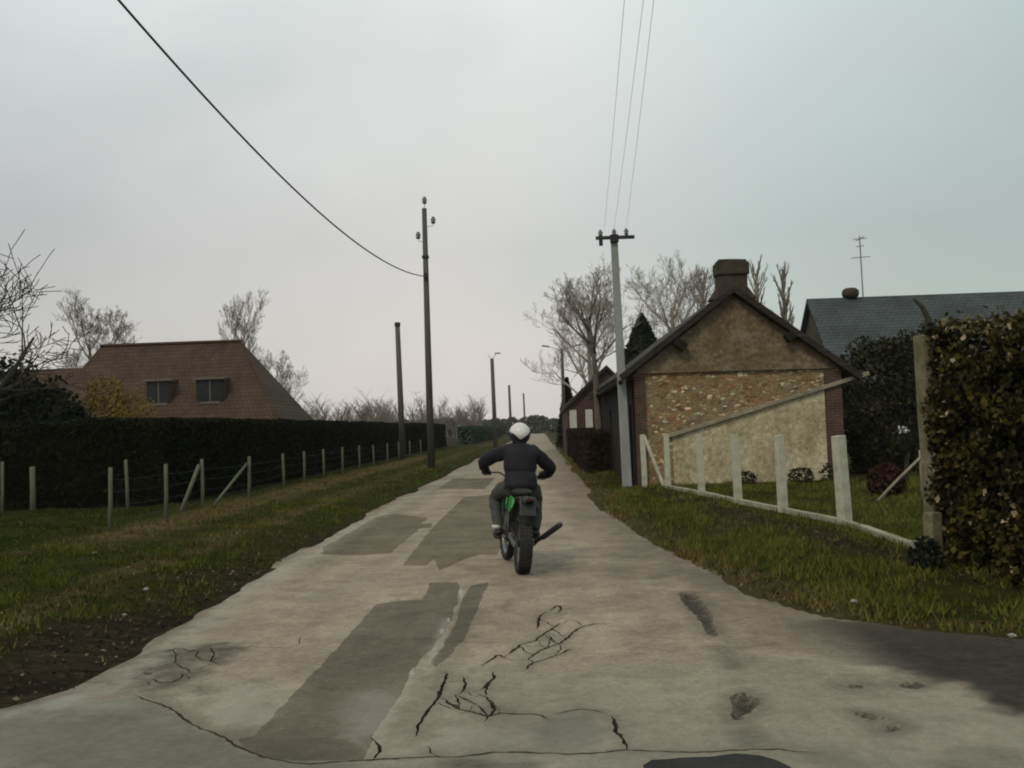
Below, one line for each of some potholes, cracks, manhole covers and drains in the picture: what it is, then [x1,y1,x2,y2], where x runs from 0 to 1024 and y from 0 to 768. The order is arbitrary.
pothole [882,724,903,732]
crack [135,606,816,765]
pothole [852,711,886,720]
pothole [679,591,719,637]
pothole [899,681,927,689]
pothole [730,692,761,720]
